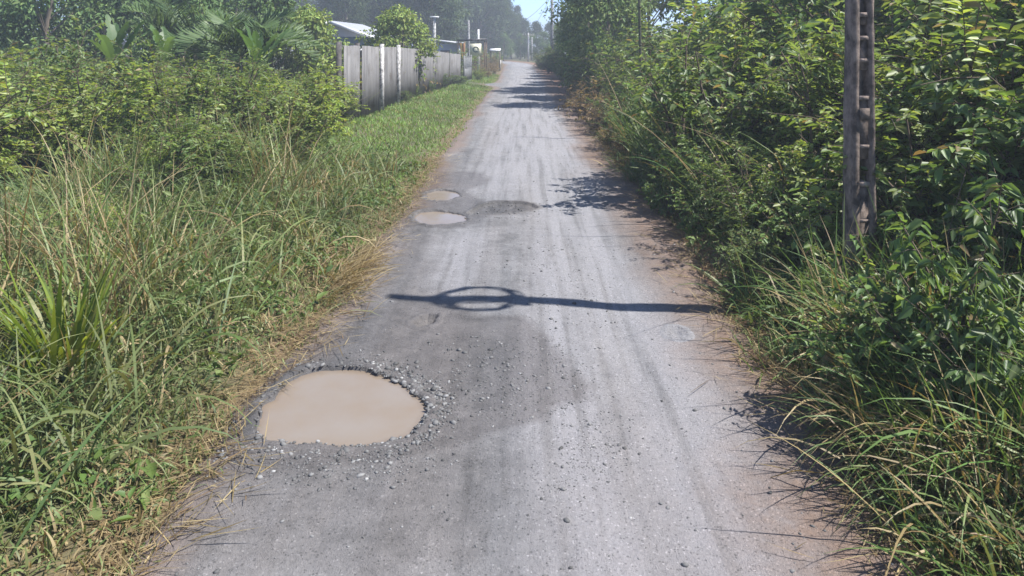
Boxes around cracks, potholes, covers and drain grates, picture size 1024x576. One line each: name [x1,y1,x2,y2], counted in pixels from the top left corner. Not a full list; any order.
pothole [242,361,442,453]
pothole [420,188,465,202]
pothole [407,208,472,226]
